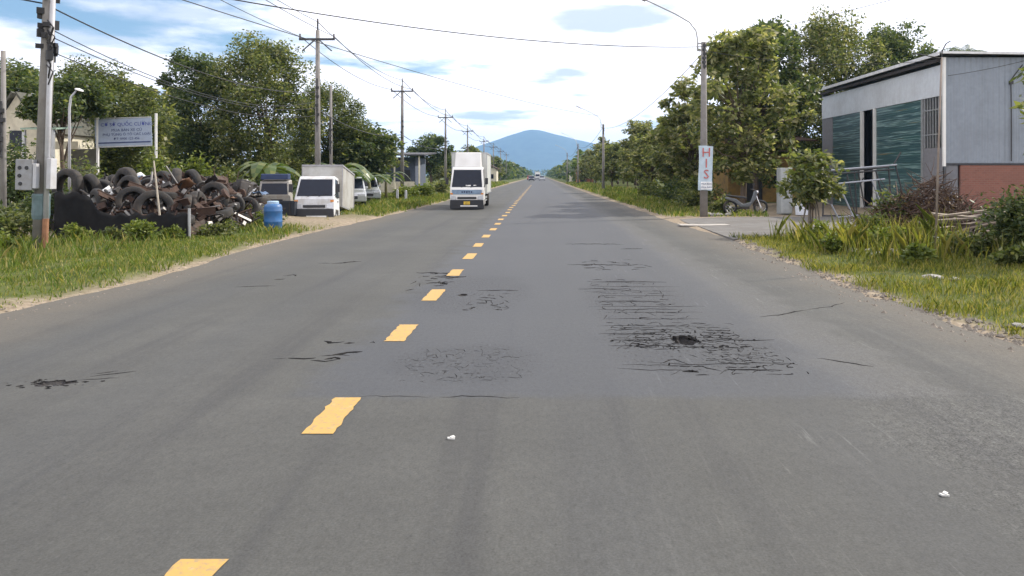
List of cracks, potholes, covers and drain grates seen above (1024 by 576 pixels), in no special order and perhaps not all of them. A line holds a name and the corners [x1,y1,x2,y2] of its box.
pothole [671,335,701,346]
crack [6,370,135,389]
crack [279,341,375,362]
crack [567,260,809,375]
crack [405,272,519,310]
crack [407,349,522,382]
